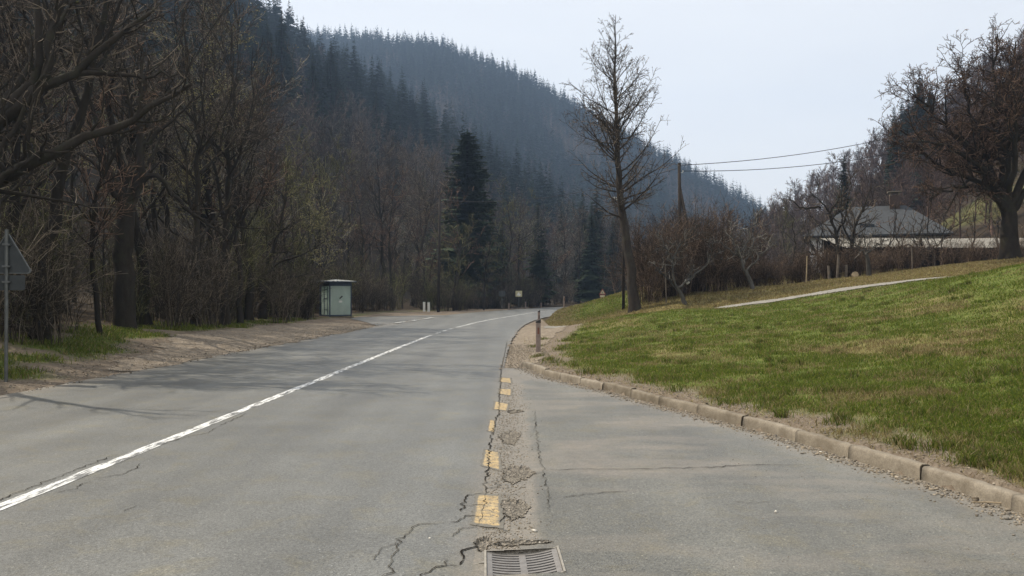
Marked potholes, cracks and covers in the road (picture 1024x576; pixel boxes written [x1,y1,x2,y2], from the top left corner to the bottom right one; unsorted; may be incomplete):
drain grate [479,546,566,576]
pothole [500,497,531,521]
pothole [498,430,522,445]
crack [0,456,140,500]
crack [524,464,782,478]
pothole [501,464,536,485]
crack [374,343,519,576]
